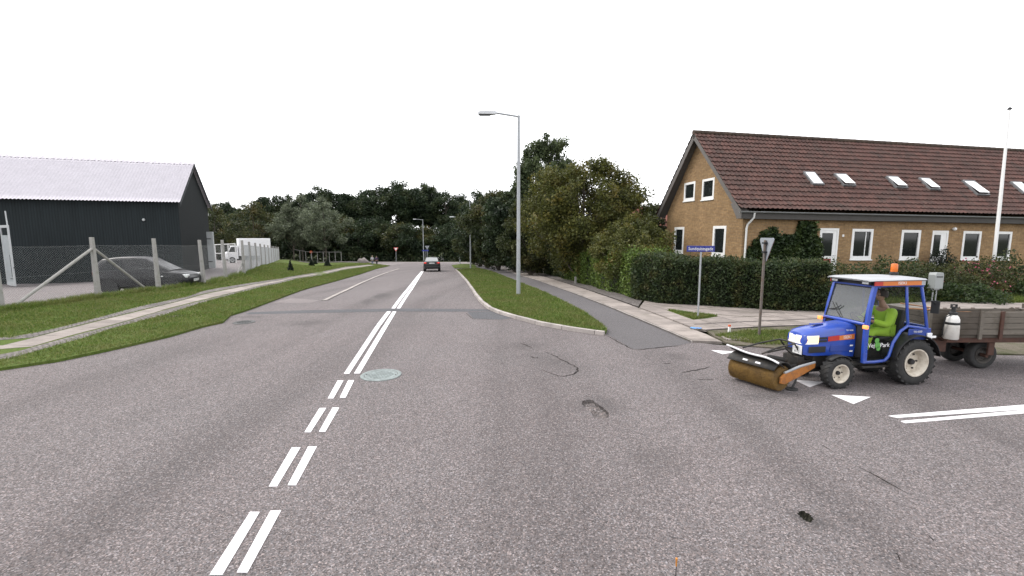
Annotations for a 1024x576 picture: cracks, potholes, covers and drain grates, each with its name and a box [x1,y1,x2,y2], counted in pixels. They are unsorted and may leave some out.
pothole [797,511,814,522]
crack [855,465,908,494]
pothole [582,400,609,418]
crack [521,343,579,377]
manhole cover [360,369,401,381]
